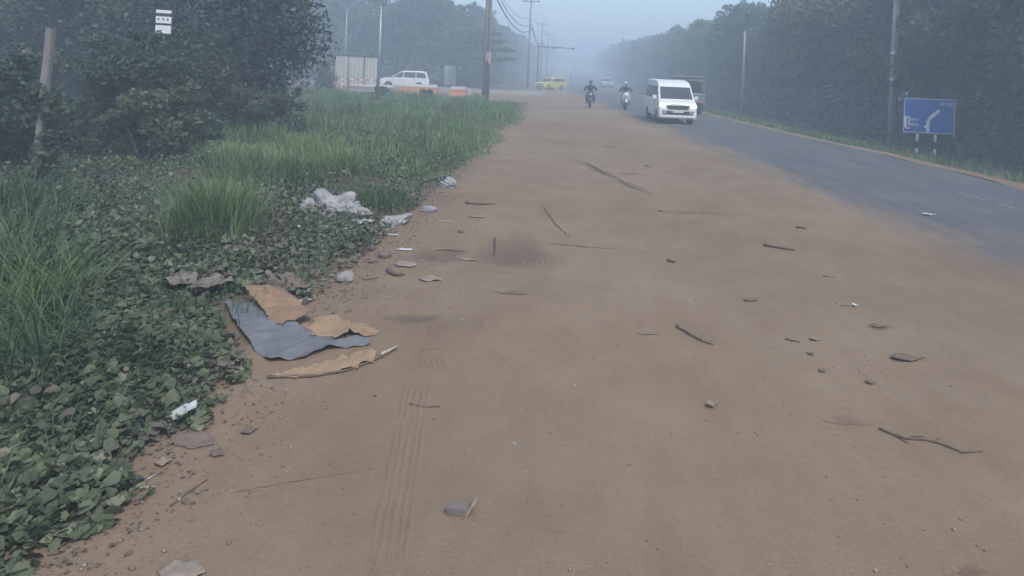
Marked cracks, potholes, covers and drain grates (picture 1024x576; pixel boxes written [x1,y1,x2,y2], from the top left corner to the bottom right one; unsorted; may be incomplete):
pothole [456,230,572,274]
